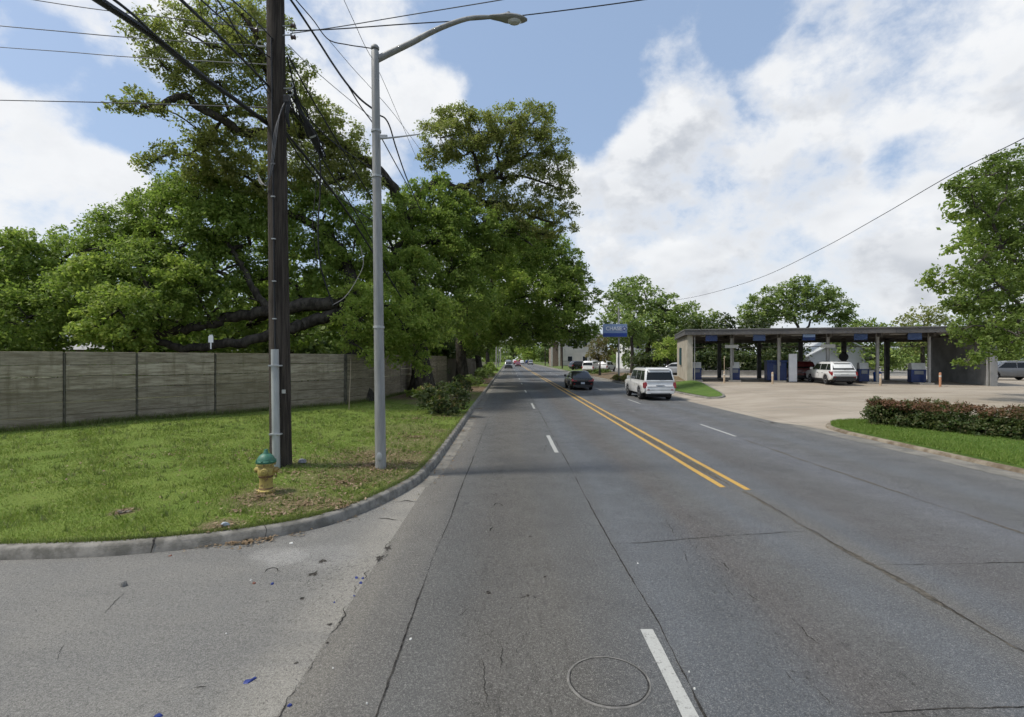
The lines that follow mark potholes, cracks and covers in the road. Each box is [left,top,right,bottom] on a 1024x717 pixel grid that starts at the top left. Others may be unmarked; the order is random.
crack [331,417,490,717]
manhole cover [567,656,652,709]
crack [857,706,1024,715]
crack [529,394,800,717]
